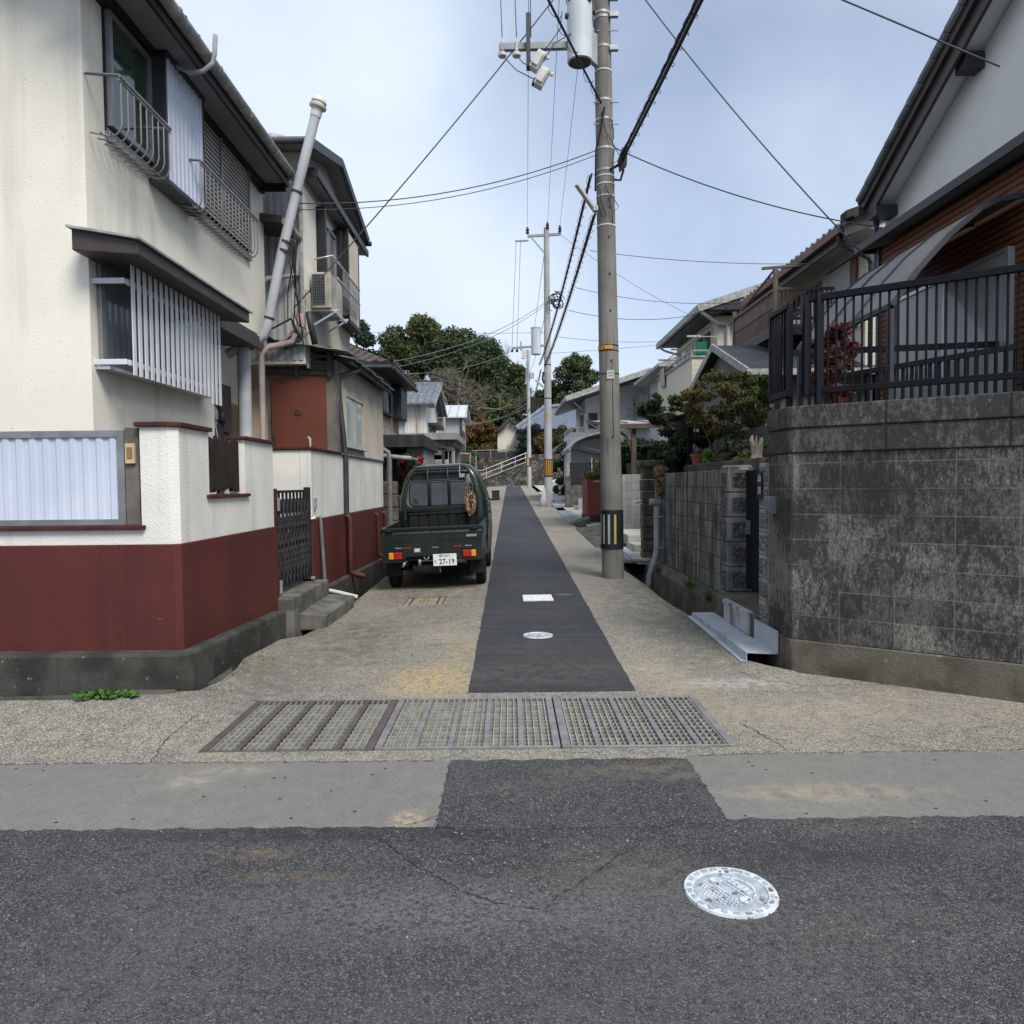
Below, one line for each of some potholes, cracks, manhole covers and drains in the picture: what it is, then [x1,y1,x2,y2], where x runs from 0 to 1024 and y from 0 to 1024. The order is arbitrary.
drain grate [552,695,737,749]
drain grate [199,699,399,752]
drain grate [374,696,561,751]
manhole cover [402,596,447,607]
manhole cover [684,867,779,919]
